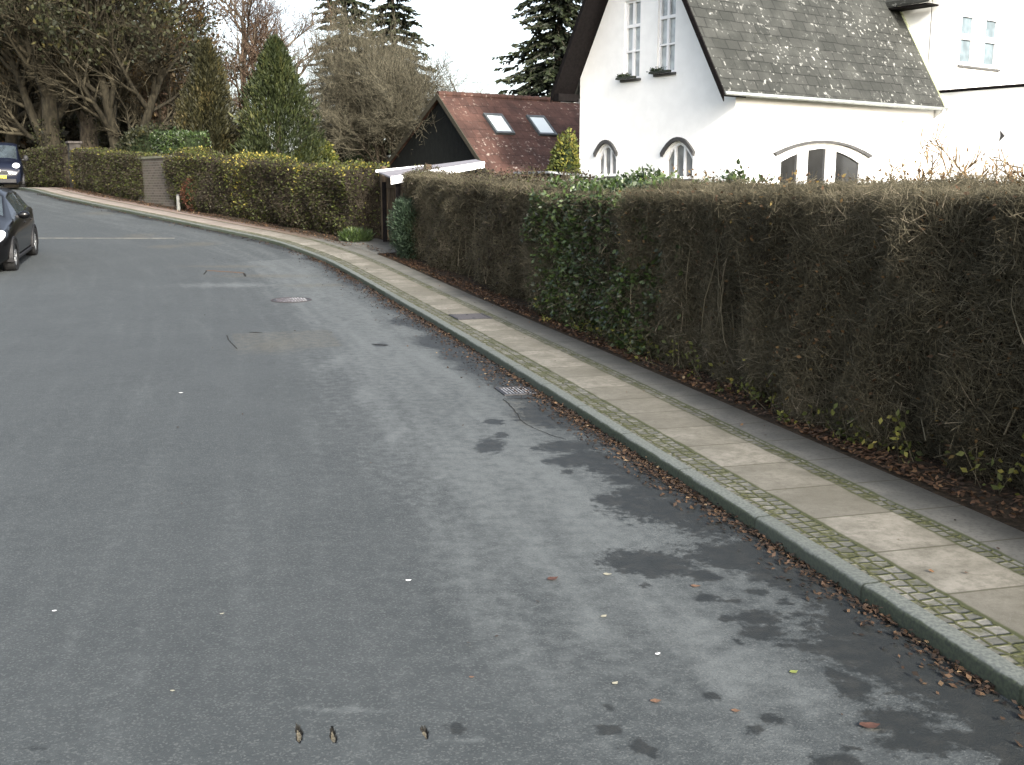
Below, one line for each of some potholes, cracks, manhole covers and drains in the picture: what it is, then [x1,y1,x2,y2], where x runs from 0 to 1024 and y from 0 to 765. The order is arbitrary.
crack [503,398,567,440]
drain grate [494,386,537,396]
